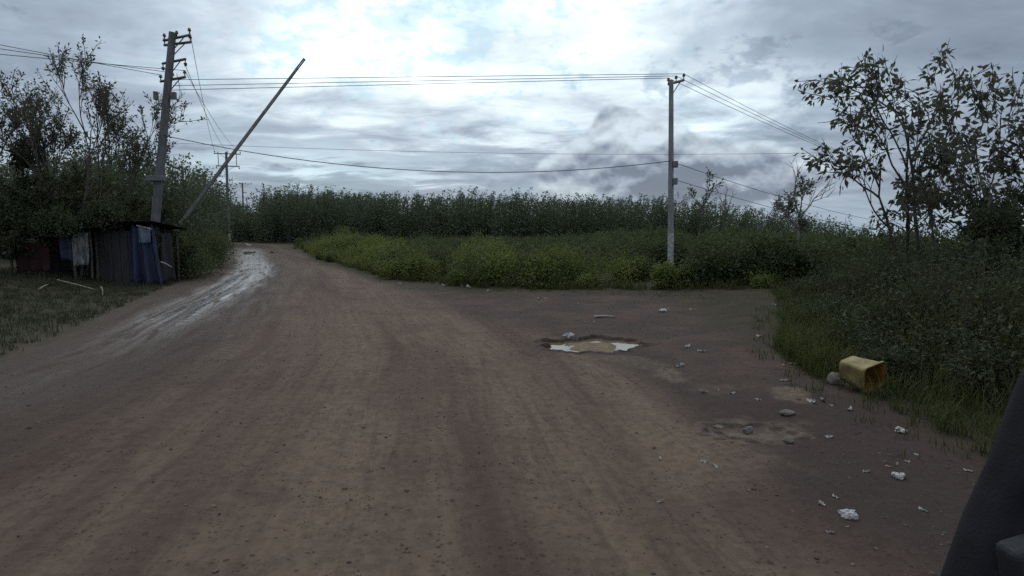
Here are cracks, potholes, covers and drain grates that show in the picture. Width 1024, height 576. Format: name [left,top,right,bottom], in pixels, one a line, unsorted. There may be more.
pothole [532,334,661,355]
pothole [693,422,816,444]
